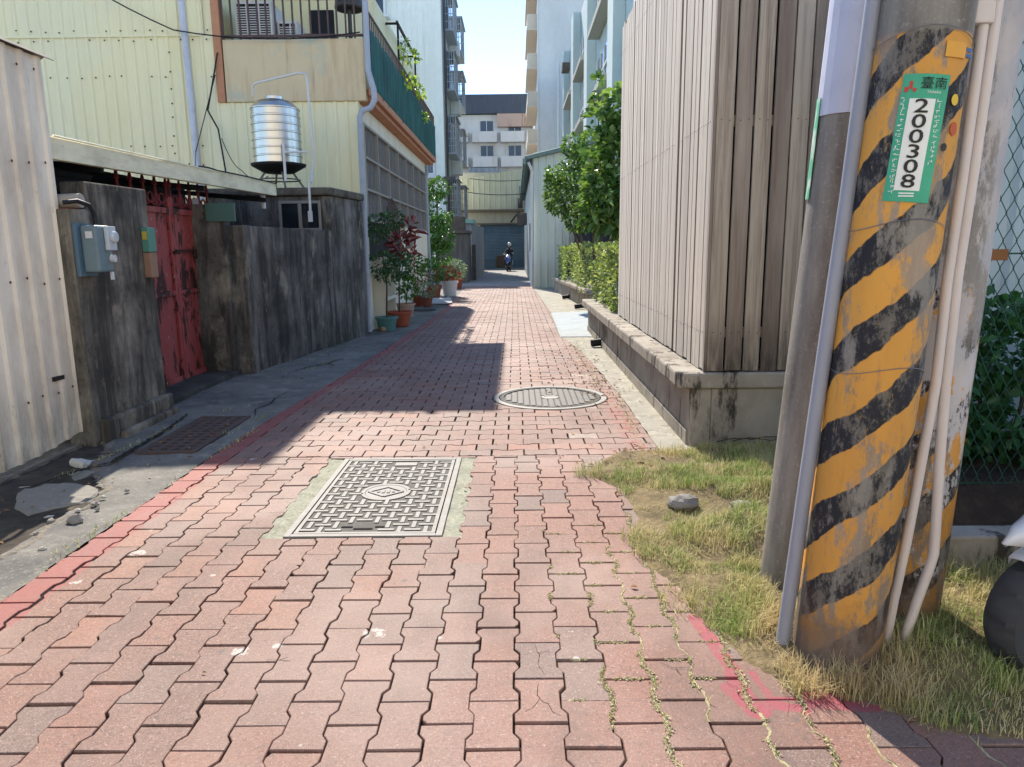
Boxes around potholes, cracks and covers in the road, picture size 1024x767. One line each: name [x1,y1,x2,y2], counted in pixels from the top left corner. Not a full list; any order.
manhole cover [493,386,607,412]
manhole cover [250,457,480,542]
drain grate [135,416,251,455]
